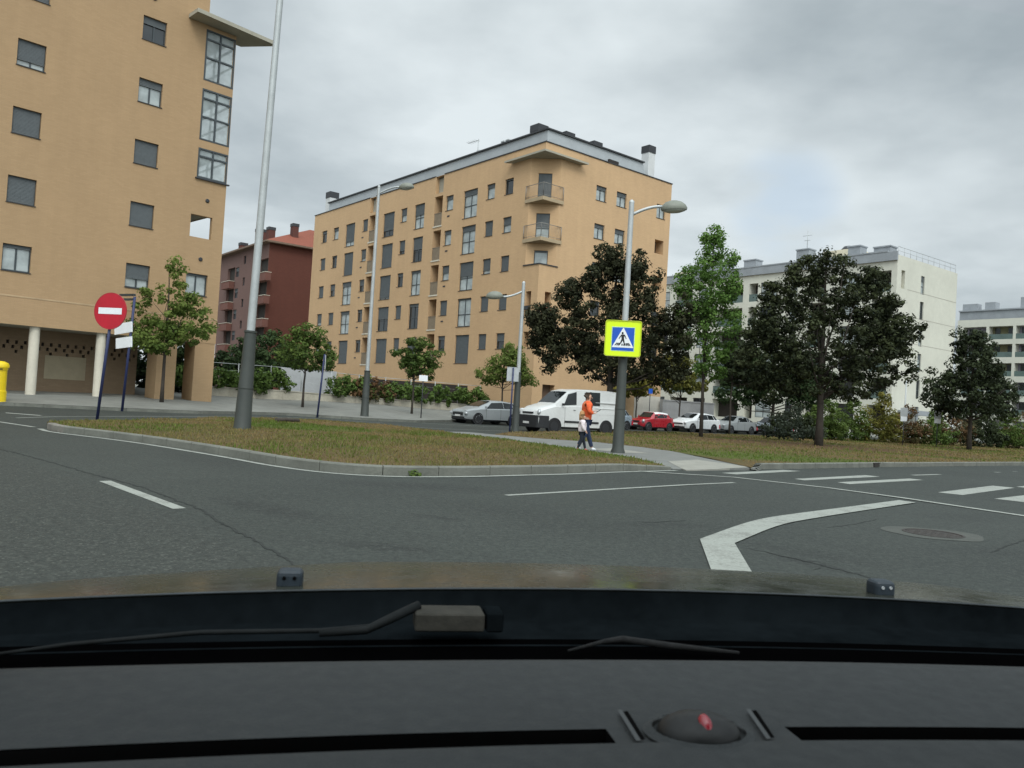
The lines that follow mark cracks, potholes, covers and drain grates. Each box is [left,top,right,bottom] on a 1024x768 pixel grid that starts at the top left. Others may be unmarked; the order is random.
crack [750,548,870,578]
manhole cover [880,526,984,542]
